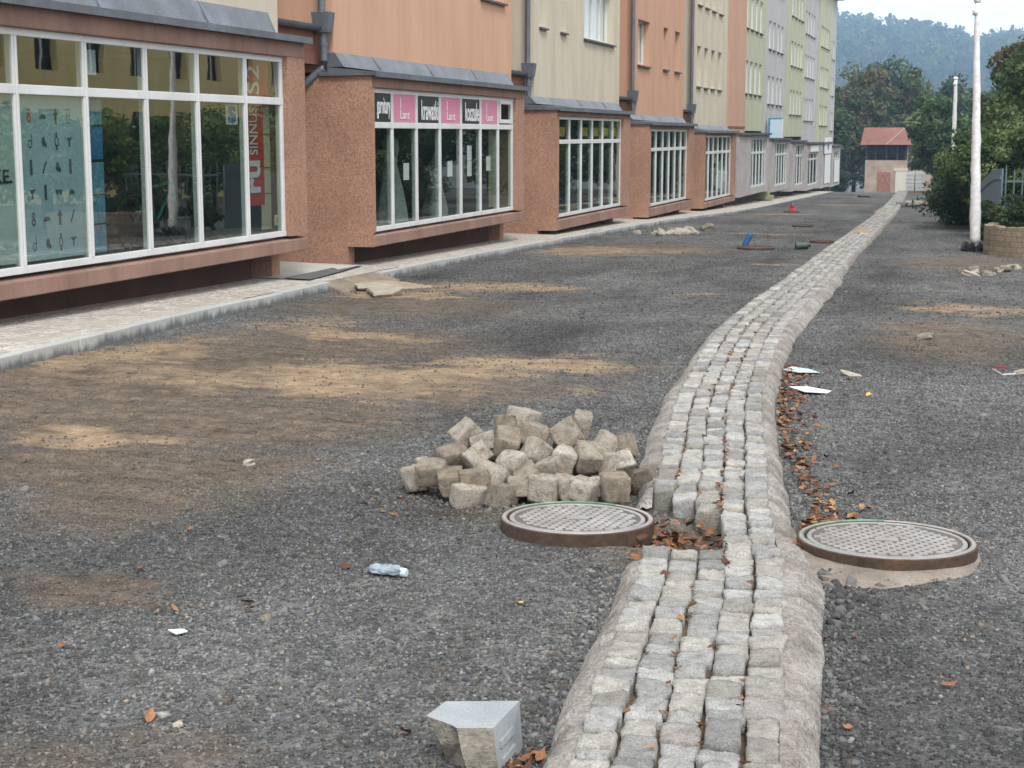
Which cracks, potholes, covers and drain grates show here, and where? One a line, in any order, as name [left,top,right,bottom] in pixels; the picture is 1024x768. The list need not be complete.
manhole cover [500,501,655,548]
manhole cover [792,519,981,589]
